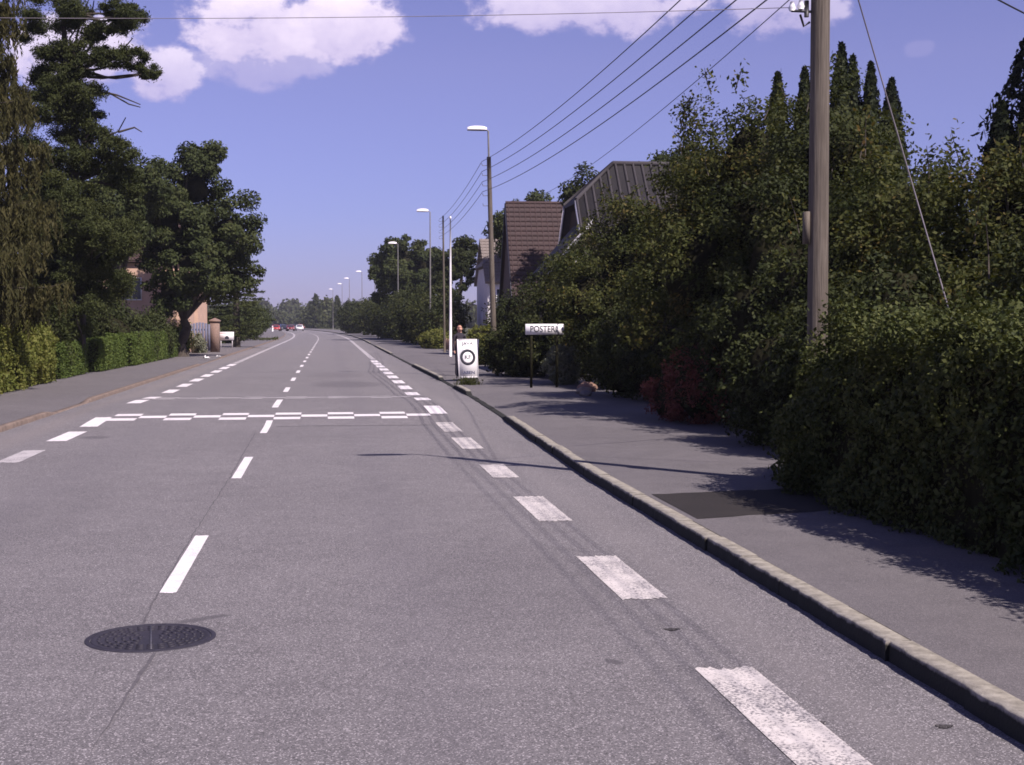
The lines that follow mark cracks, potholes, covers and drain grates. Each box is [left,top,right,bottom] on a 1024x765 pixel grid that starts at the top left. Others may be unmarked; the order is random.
manhole cover [84,623,216,653]
crack [161,434,255,589]
